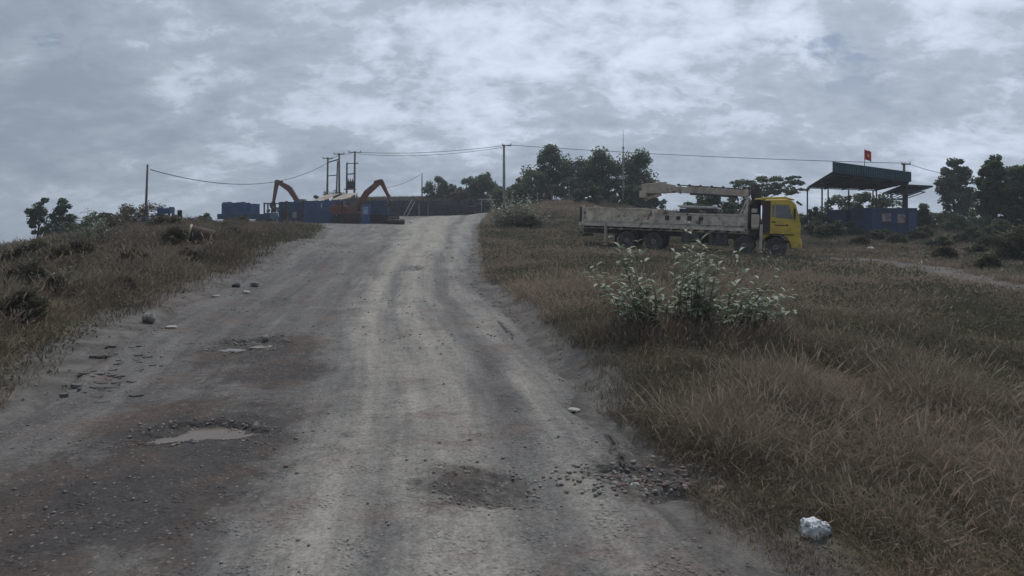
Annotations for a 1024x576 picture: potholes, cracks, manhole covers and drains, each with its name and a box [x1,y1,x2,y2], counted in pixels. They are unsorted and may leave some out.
pothole [190,335,300,356]
pothole [120,416,281,447]
pothole [432,465,546,513]
